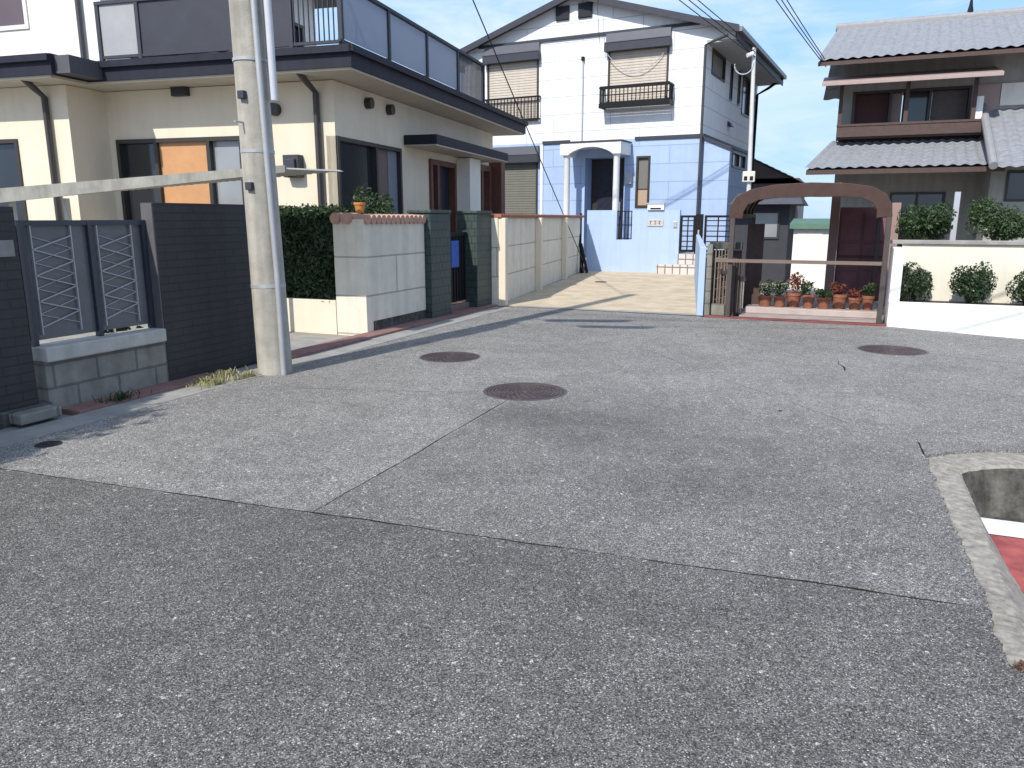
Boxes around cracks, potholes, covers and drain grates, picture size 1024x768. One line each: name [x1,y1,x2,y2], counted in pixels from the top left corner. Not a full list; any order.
manhole cover [483,382,567,401]
manhole cover [857,345,929,356]
manhole cover [420,352,480,362]
